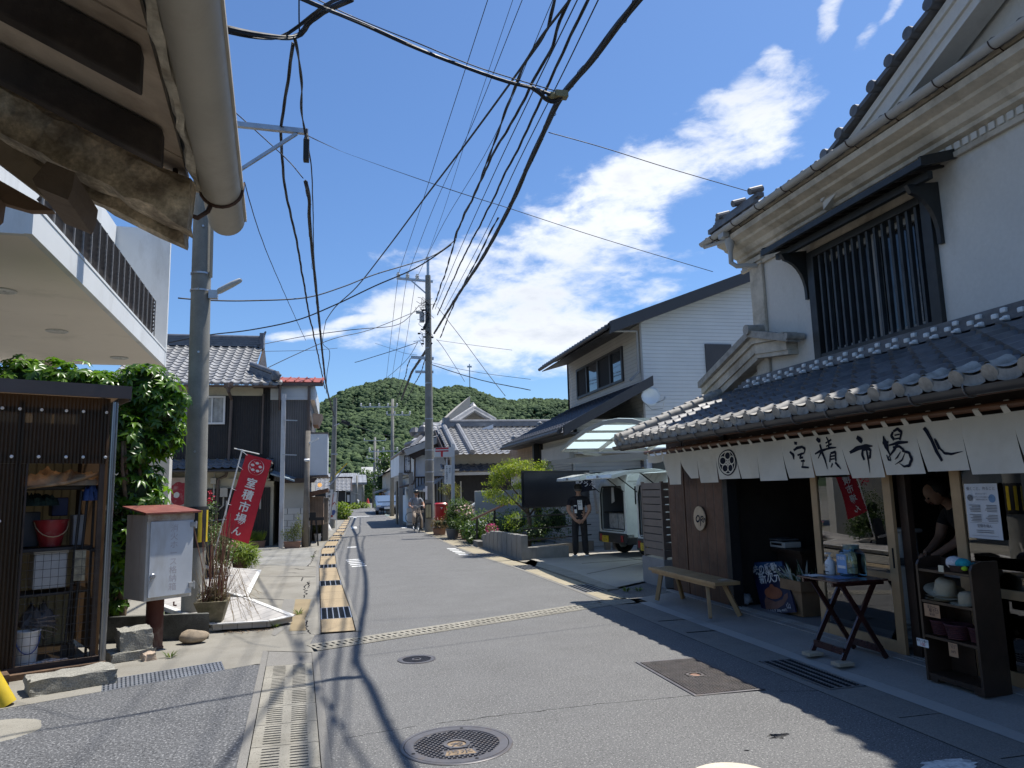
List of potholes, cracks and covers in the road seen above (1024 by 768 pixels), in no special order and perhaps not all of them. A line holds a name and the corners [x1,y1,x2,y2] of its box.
manhole cover [636,657,765,696]
crack [300,551,316,598]
drain grate [321,606,352,619]
manhole cover [397,655,436,664]
drain grate [760,658,865,690]
drain grate [101,661,226,692]
crack [436,695,693,724]
manhole cover [399,725,513,766]
